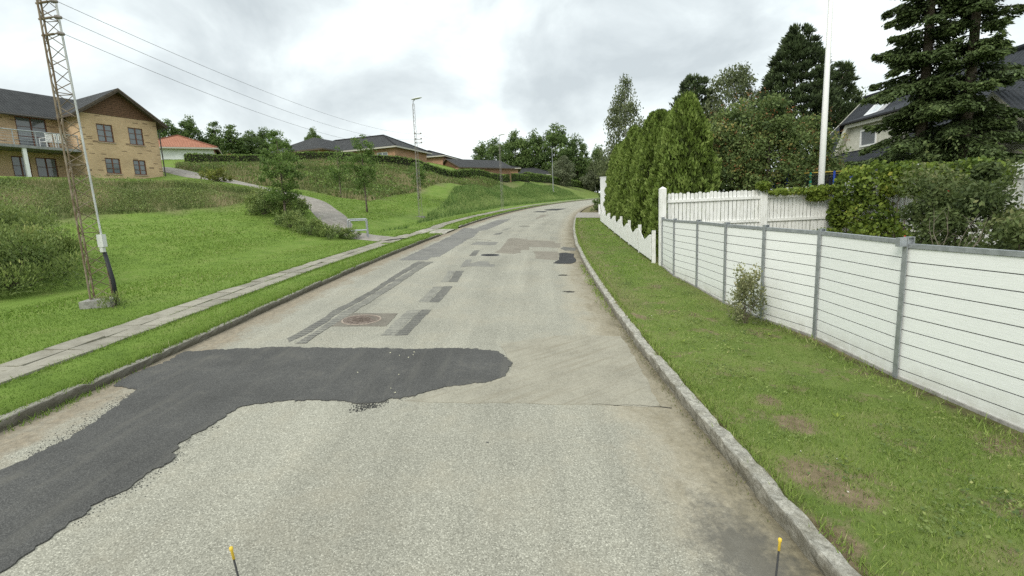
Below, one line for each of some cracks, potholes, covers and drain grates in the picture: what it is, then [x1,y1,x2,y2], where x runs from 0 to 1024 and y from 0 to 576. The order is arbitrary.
manhole cover [341,314,382,325]
